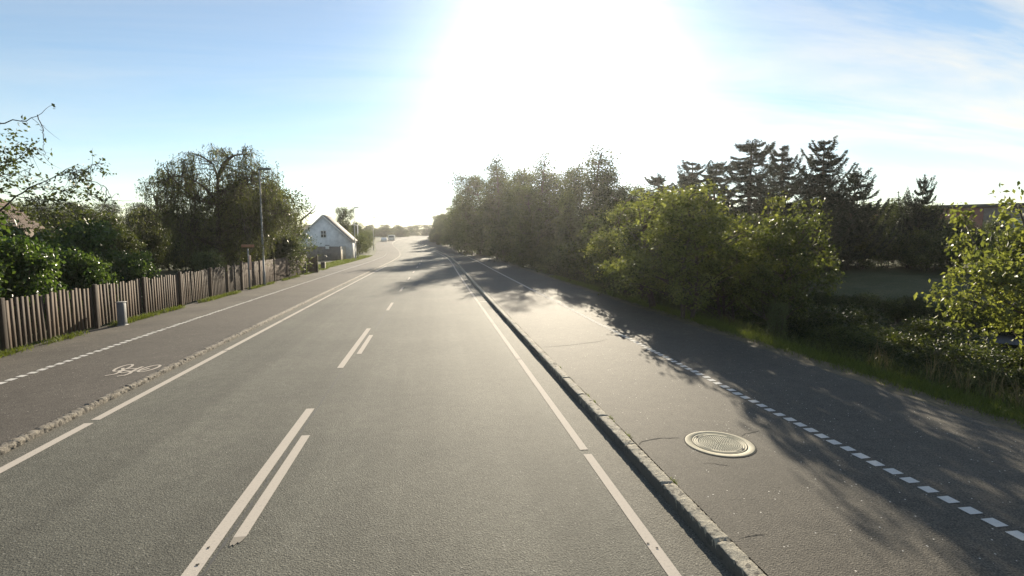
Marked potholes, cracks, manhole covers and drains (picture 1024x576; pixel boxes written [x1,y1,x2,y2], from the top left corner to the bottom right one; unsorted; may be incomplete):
manhole cover [684,431,757,458]
